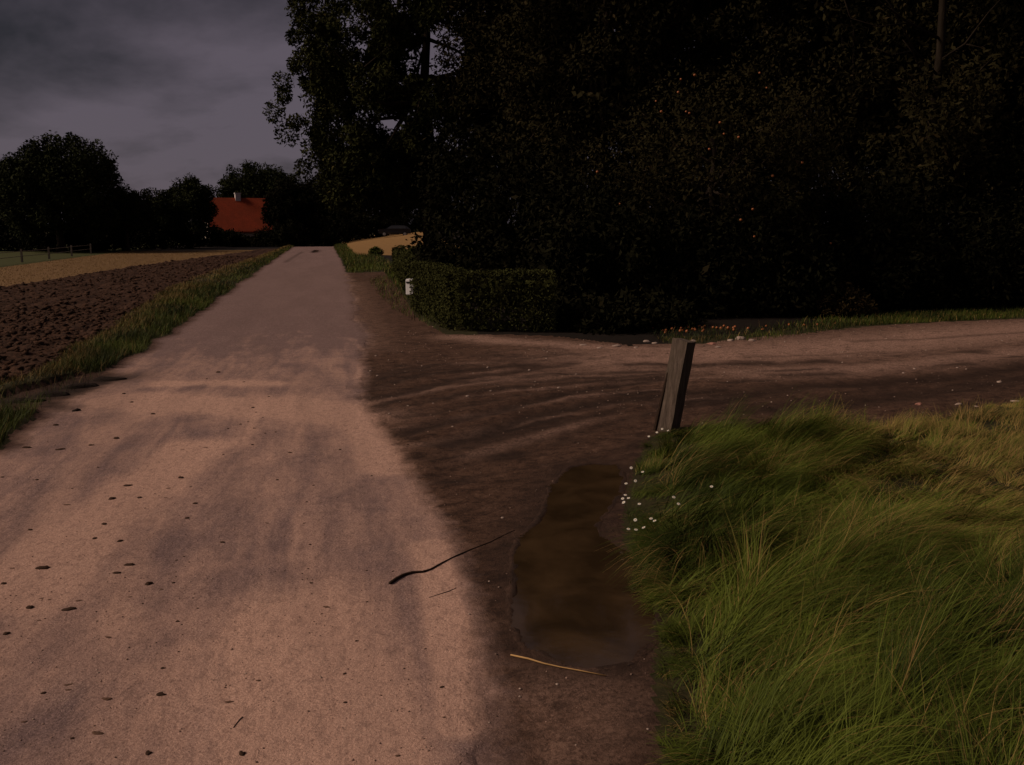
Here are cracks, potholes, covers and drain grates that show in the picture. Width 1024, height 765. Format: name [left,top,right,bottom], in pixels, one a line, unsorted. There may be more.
pothole [505,463,664,672]
